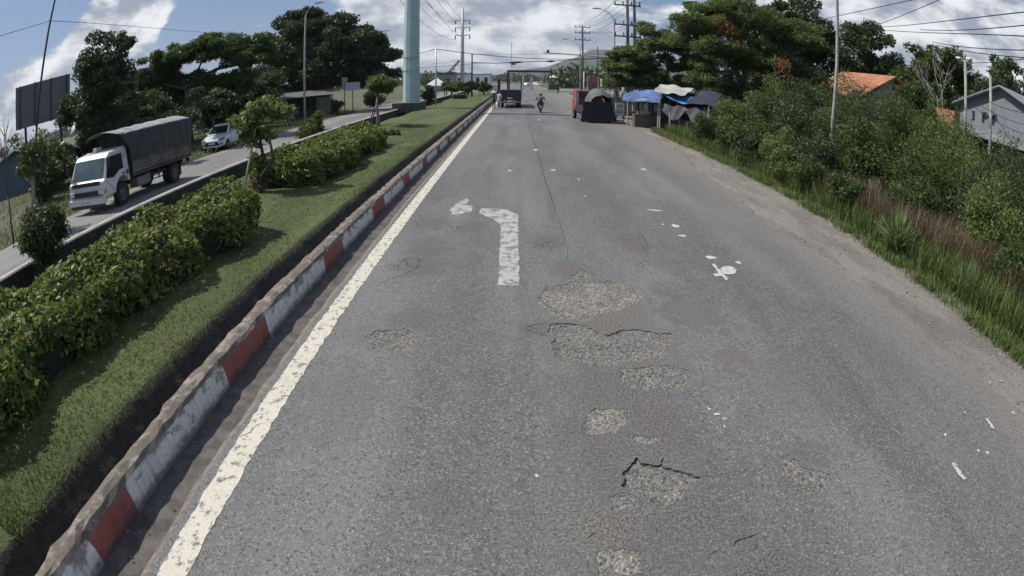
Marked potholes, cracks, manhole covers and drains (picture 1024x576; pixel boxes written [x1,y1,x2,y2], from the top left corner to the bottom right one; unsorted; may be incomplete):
pothole [547,323,672,367]
crack [525,119,571,265]
crack [709,529,760,556]
